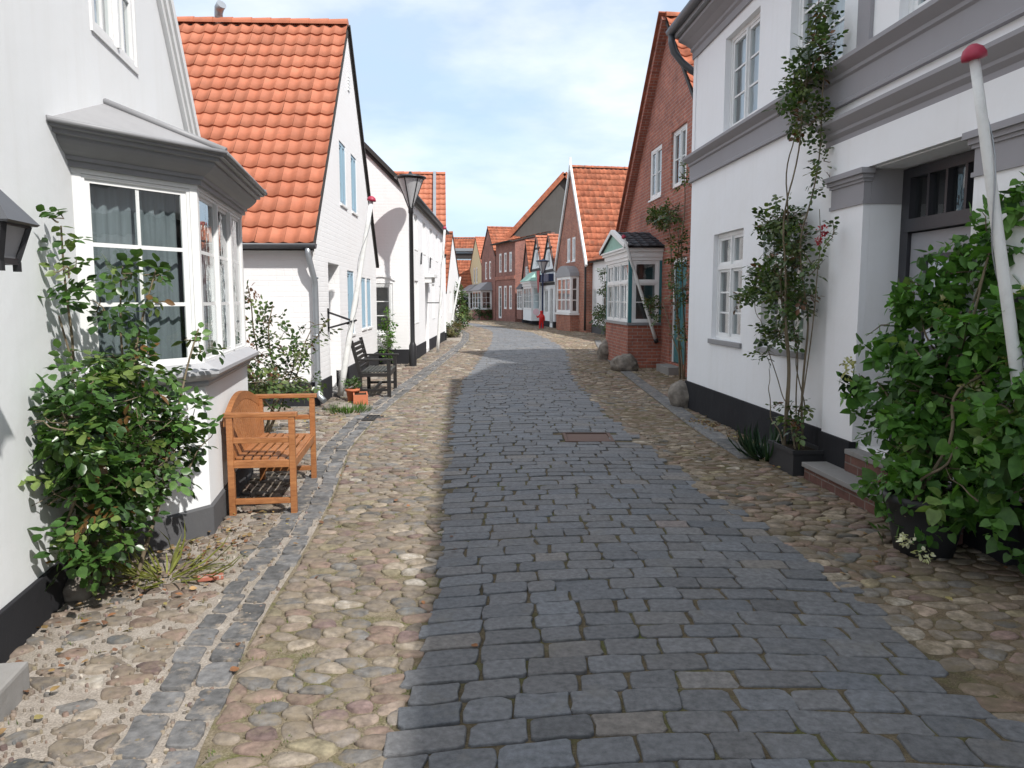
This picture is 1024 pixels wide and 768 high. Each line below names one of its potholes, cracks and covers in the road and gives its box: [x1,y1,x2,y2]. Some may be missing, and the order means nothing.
manhole cover [562,433,615,442]
